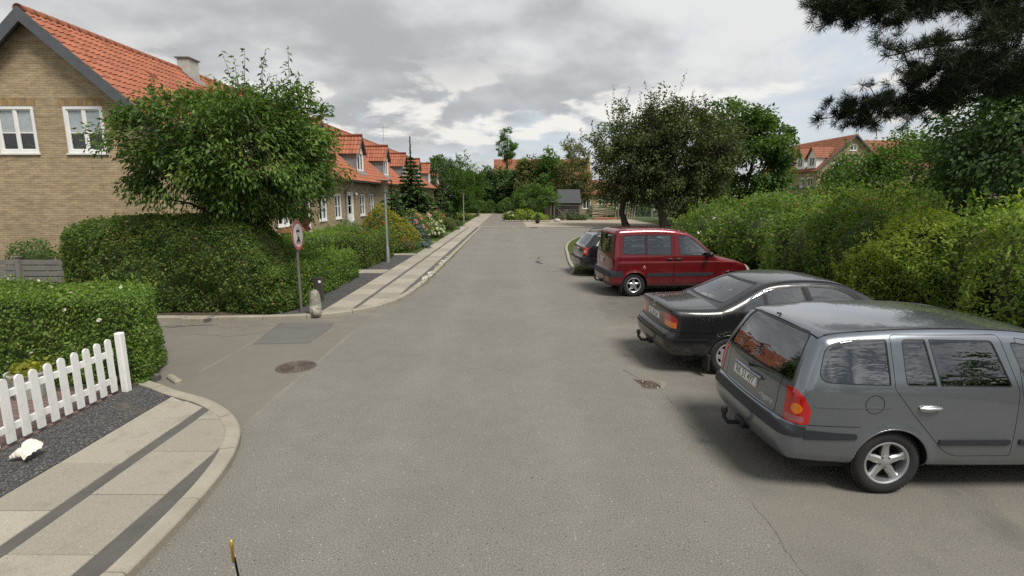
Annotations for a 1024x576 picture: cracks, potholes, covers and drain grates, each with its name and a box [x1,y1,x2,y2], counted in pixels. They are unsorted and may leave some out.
manhole cover [275,360,317,374]
